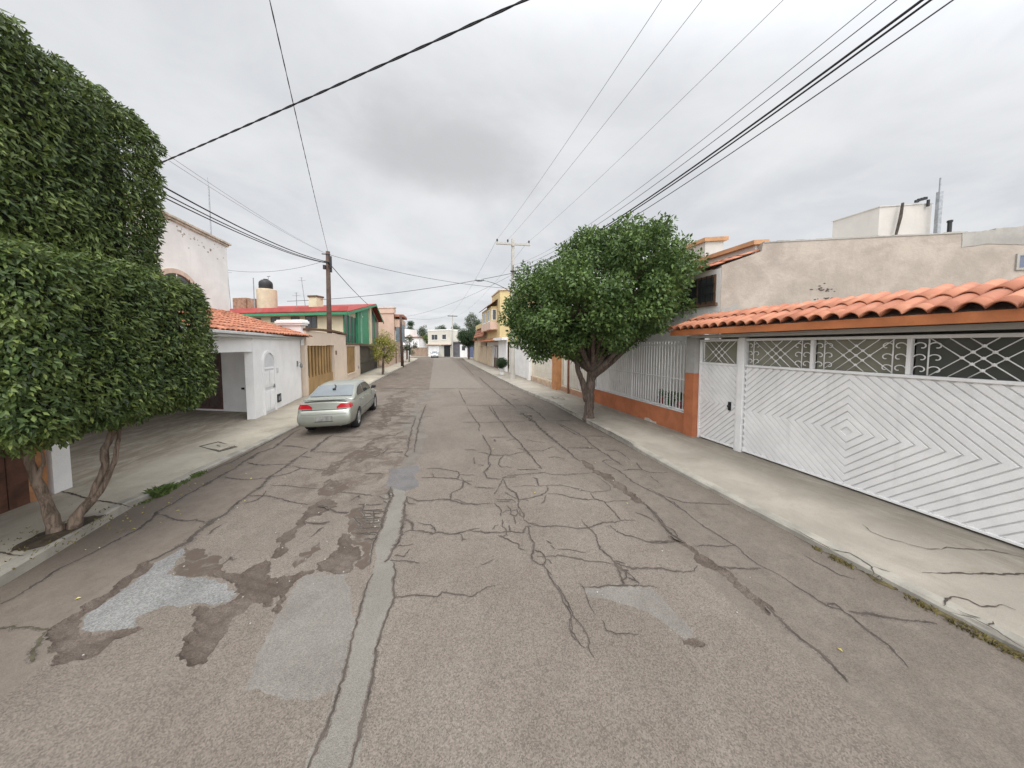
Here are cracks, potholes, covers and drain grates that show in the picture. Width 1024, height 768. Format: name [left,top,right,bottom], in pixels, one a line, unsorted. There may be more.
utility cover [199,442,237,452]
crack [0,360,1024,768]
